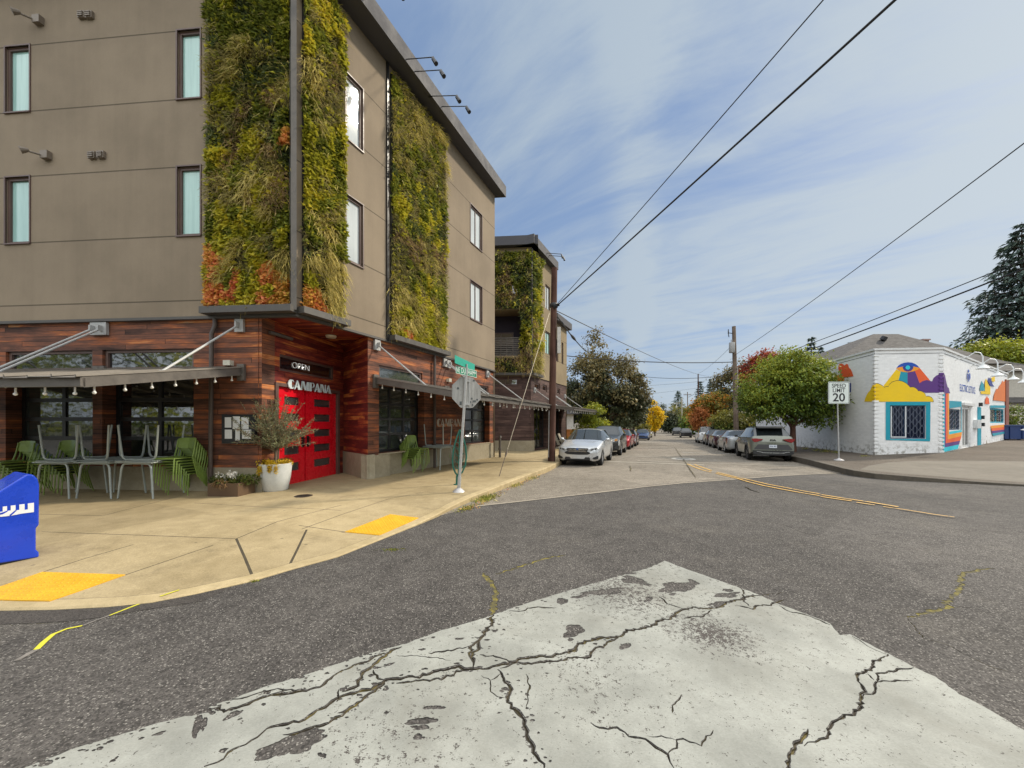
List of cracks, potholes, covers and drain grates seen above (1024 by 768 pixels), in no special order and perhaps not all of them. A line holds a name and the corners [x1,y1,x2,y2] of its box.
crack [209,555,860,768]
crack [878,568,1015,674]
crack [786,656,909,768]
